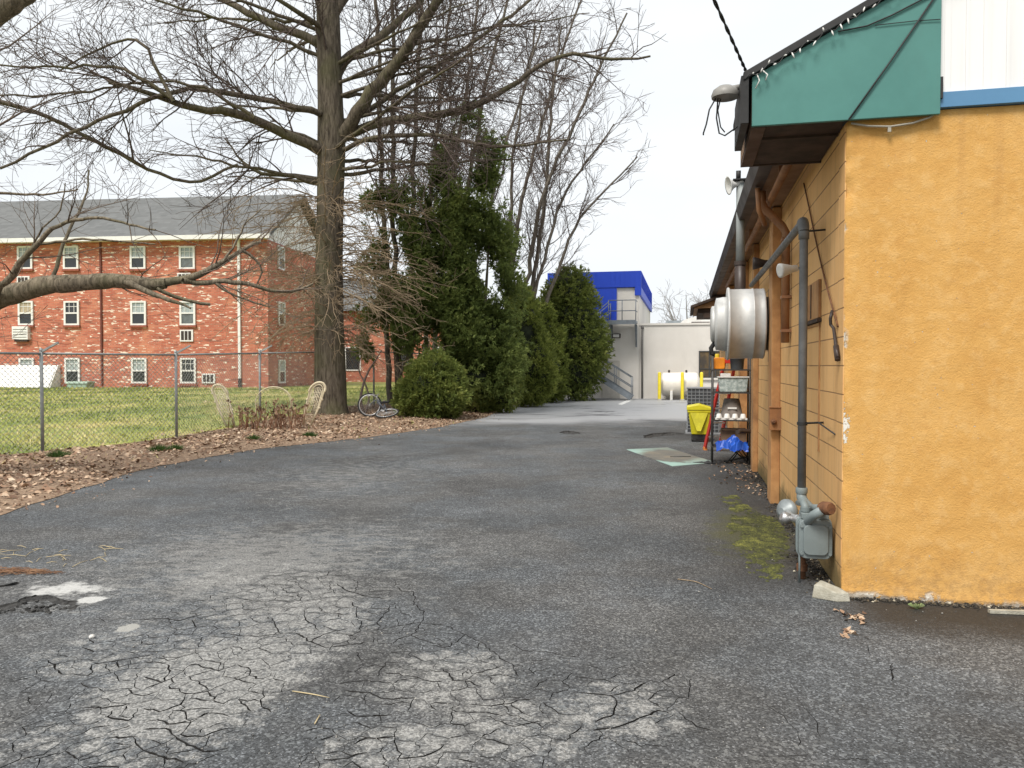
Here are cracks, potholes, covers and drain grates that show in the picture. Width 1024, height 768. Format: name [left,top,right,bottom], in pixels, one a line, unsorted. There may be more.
crack [299,581,713,768]
crack [758,702,821,757]
crack [0,569,377,768]
pothole [0,595,80,614]
